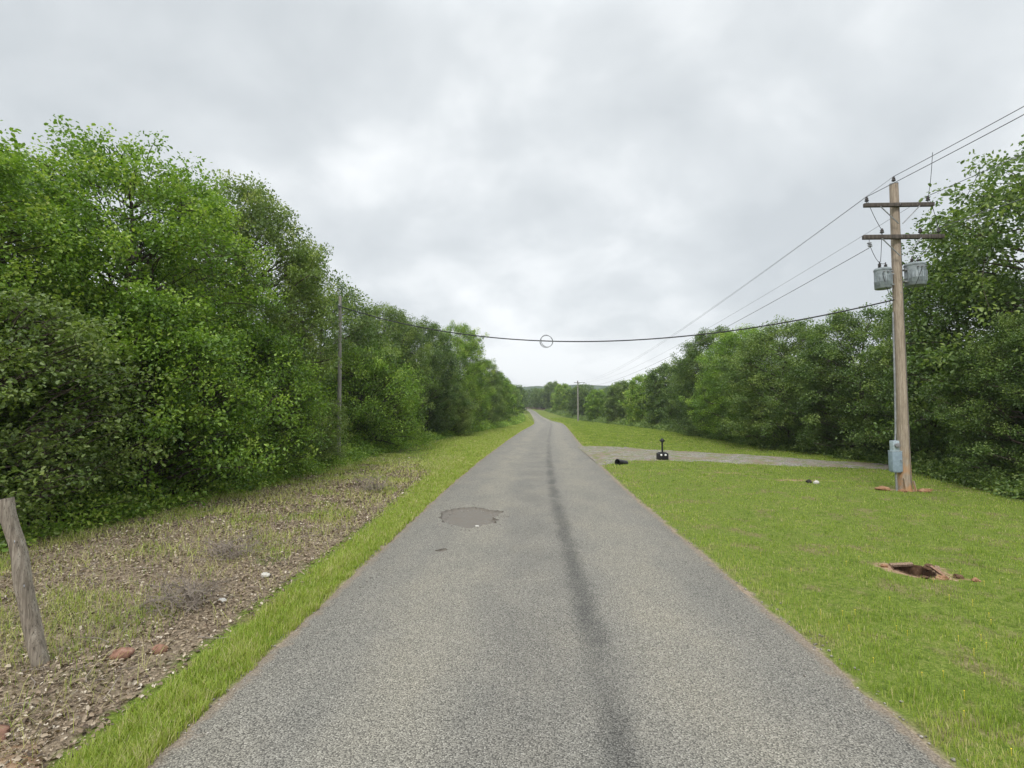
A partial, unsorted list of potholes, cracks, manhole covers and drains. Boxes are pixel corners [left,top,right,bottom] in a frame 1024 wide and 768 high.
pothole [438,507,504,528]
